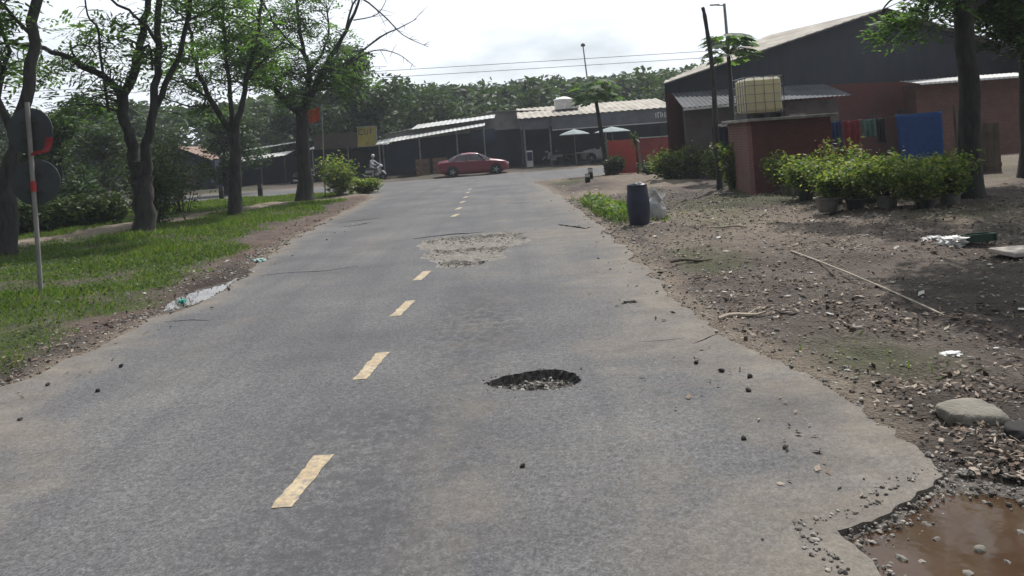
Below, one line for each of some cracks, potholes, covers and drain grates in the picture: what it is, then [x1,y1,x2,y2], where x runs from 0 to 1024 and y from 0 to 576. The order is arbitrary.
pothole [416,231,536,268]
pothole [459,368,617,399]
